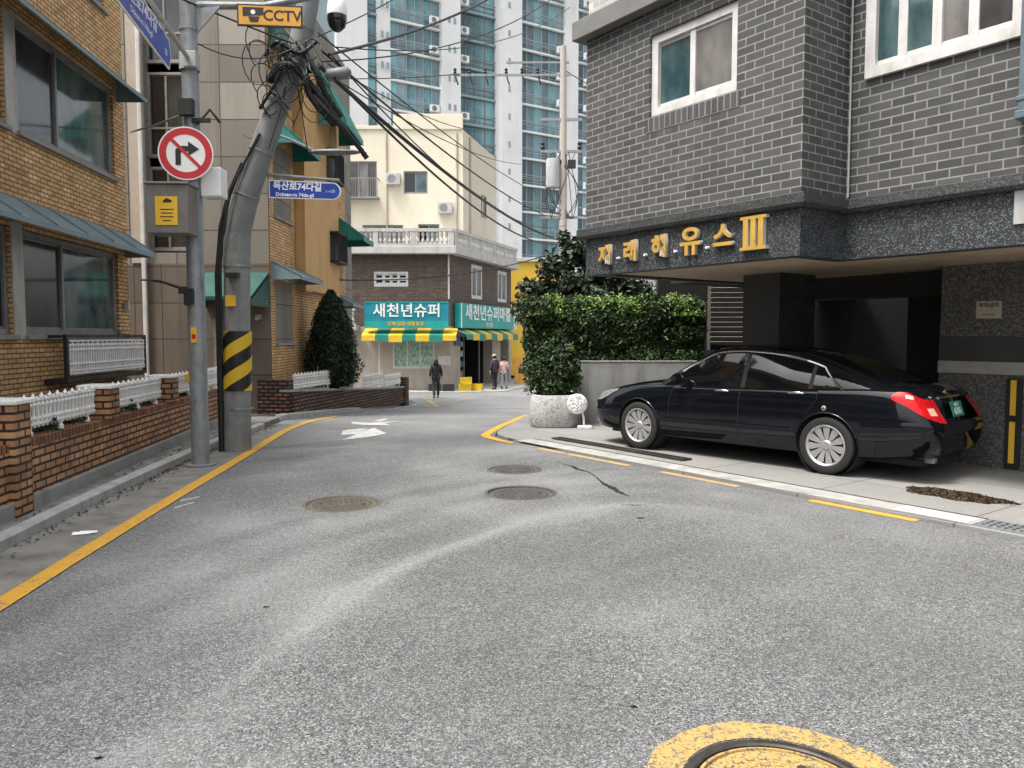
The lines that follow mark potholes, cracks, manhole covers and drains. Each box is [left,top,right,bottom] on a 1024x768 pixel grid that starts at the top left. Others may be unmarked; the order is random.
manhole cover [484,485,557,500]
manhole cover [302,495,382,512]
manhole cover [487,464,543,474]
manhole cover [685,739,855,768]
crack [556,461,645,506]
drain grate [973,519,1024,535]
